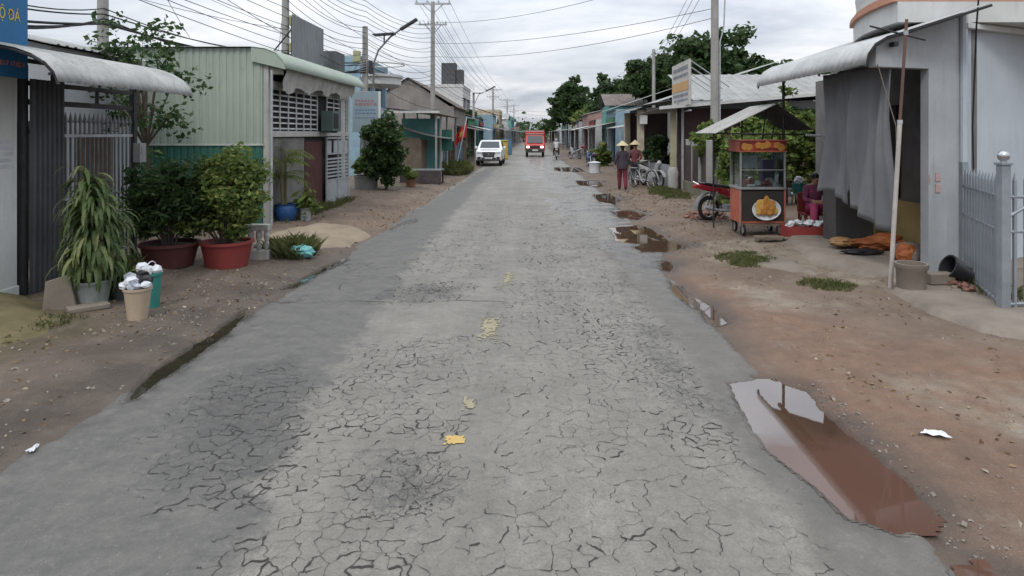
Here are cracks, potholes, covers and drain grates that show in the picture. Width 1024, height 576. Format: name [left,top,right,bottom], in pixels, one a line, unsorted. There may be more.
pothole [591,193,626,205]
crack [301,206,744,465]
crack [133,334,487,576]
pothole [656,258,678,273]
crack [467,444,847,576]
pothole [605,225,695,253]
